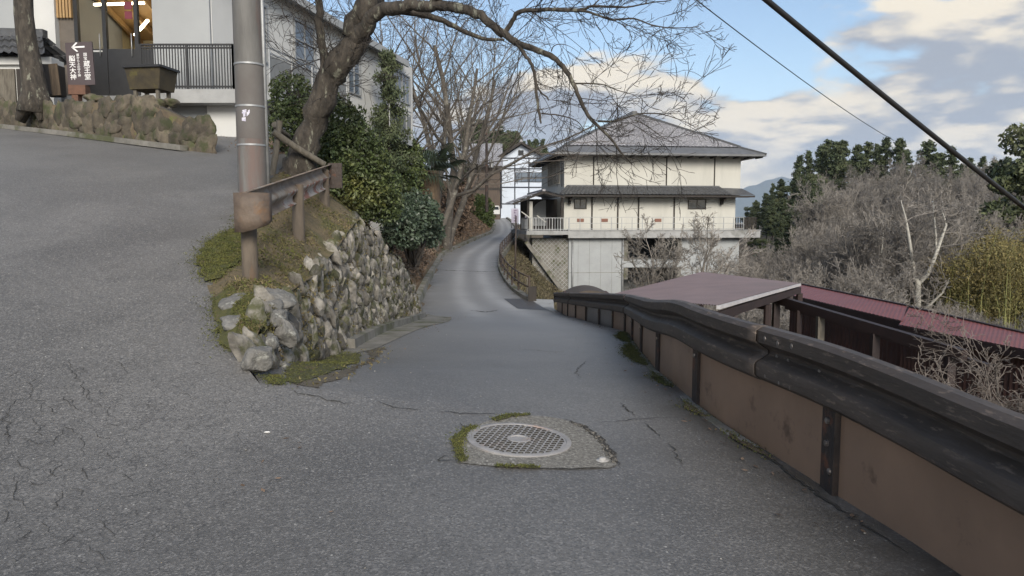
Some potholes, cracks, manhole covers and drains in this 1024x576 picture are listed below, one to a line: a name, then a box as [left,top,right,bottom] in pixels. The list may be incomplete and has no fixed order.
manhole cover [466,423,572,457]
crack [1,362,117,563]
crack [566,403,683,466]
